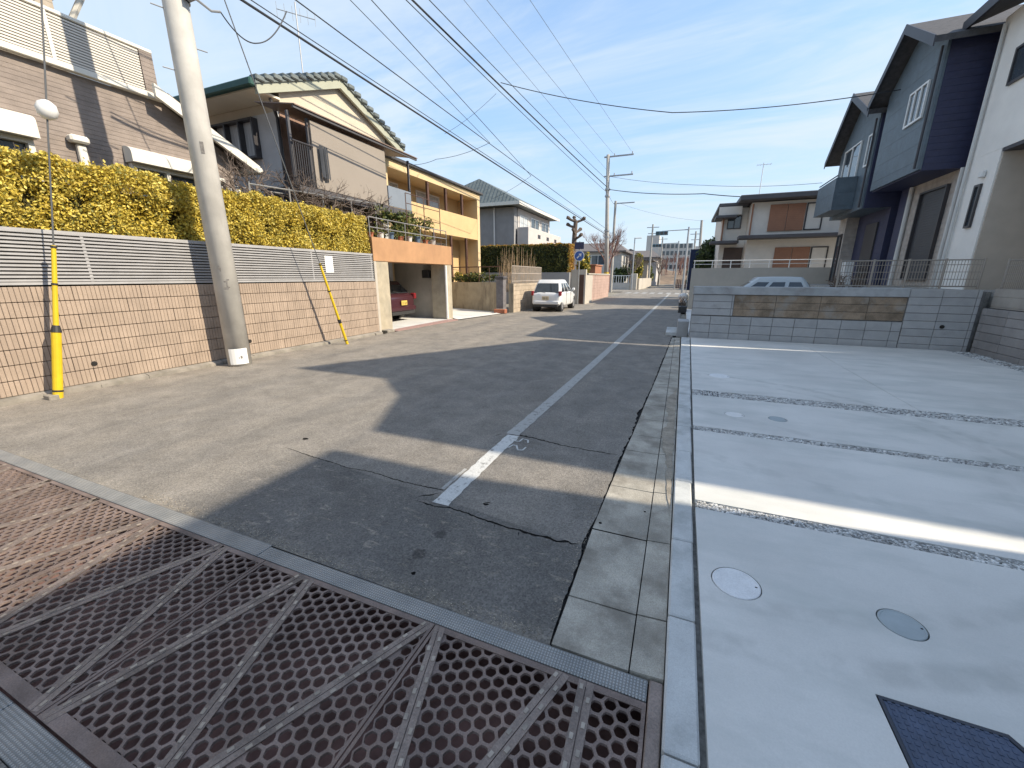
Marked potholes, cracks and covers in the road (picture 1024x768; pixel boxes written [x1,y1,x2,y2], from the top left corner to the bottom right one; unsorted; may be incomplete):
manhole cover [712,568,761,600]
drain grate [0,465,74,515]
crack [291,338,672,646]
drain grate [0,489,157,592]
manhole cover [876,609,928,642]
drain grate [334,625,646,768]
drain grate [0,520,265,716]
drain grate [36,561,435,768]
